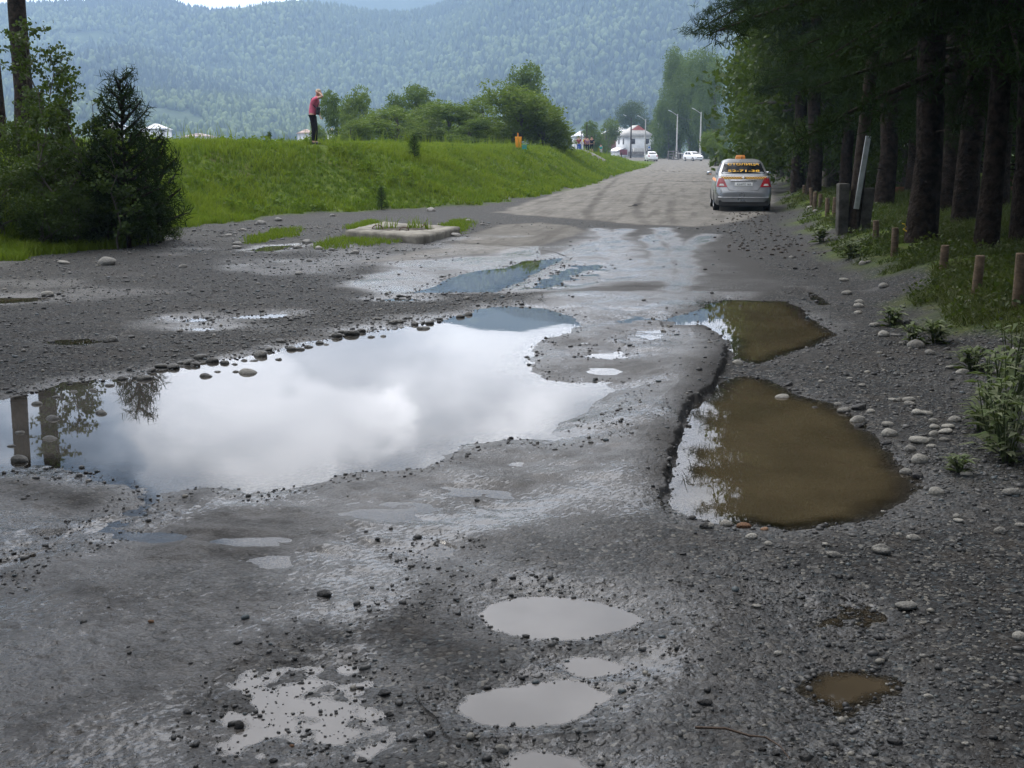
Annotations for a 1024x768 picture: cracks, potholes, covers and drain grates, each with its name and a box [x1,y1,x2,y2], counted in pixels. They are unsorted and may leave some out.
pothole [752,649,947,735]
pothole [450,579,675,647]
pothole [0,305,650,585]
pothole [200,662,419,768]
pothole [643,366,945,535]
pothole [685,297,854,365]
pothole [421,661,651,739]
